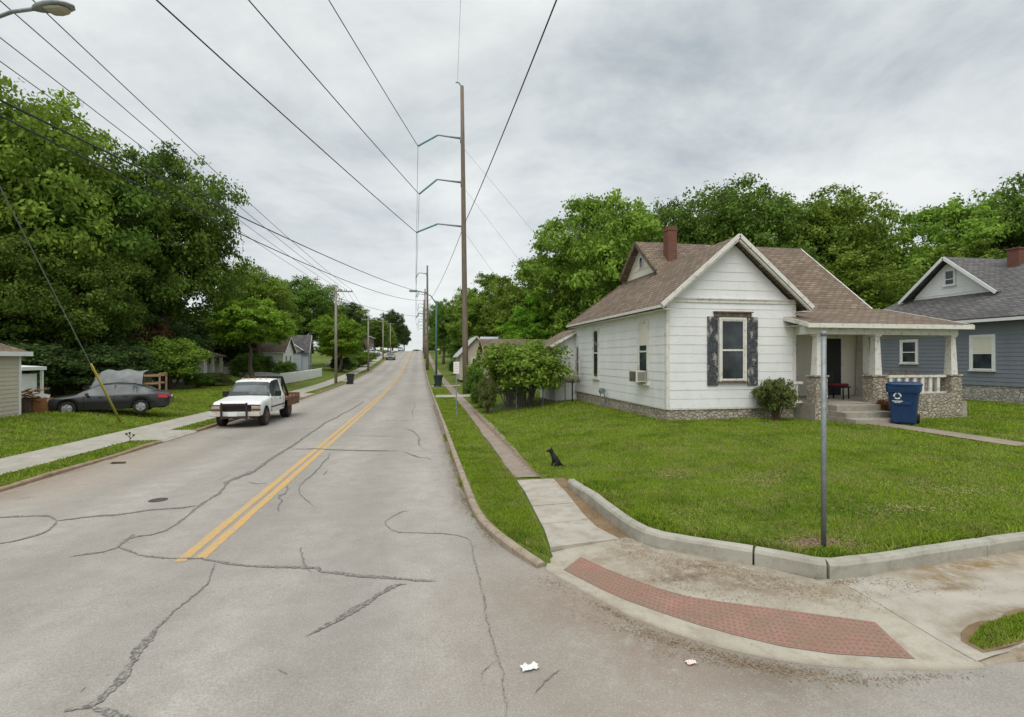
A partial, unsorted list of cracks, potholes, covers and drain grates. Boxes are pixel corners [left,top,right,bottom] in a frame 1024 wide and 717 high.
crack [251,453,330,511]
crack [117,511,468,636]
